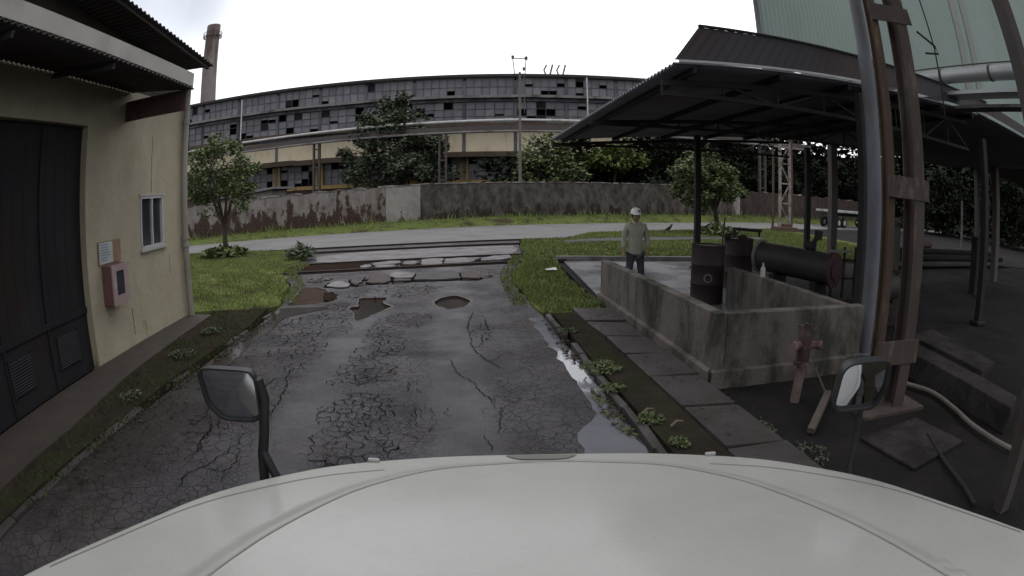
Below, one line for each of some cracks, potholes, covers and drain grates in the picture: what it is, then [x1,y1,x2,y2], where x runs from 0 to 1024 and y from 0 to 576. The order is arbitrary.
pothole [431,295,473,309]
pothole [287,287,339,306]
crack [465,314,501,367]
crack [451,362,530,450]
pothole [347,297,394,321]
crack [145,278,462,487]
